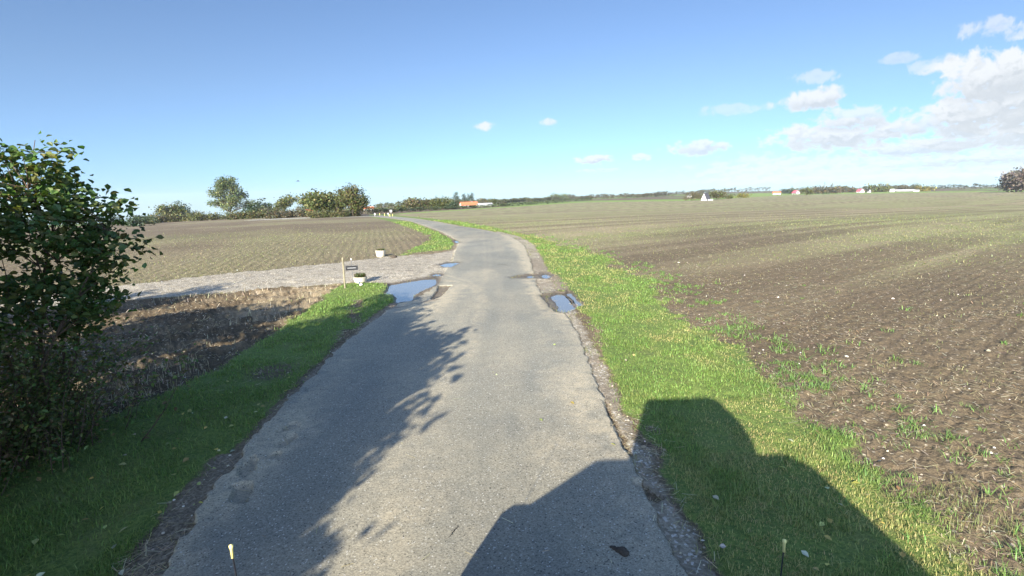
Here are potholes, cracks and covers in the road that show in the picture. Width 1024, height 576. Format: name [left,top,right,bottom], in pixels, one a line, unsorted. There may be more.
pothole [381,276,442,303]
pothole [539,290,585,313]
